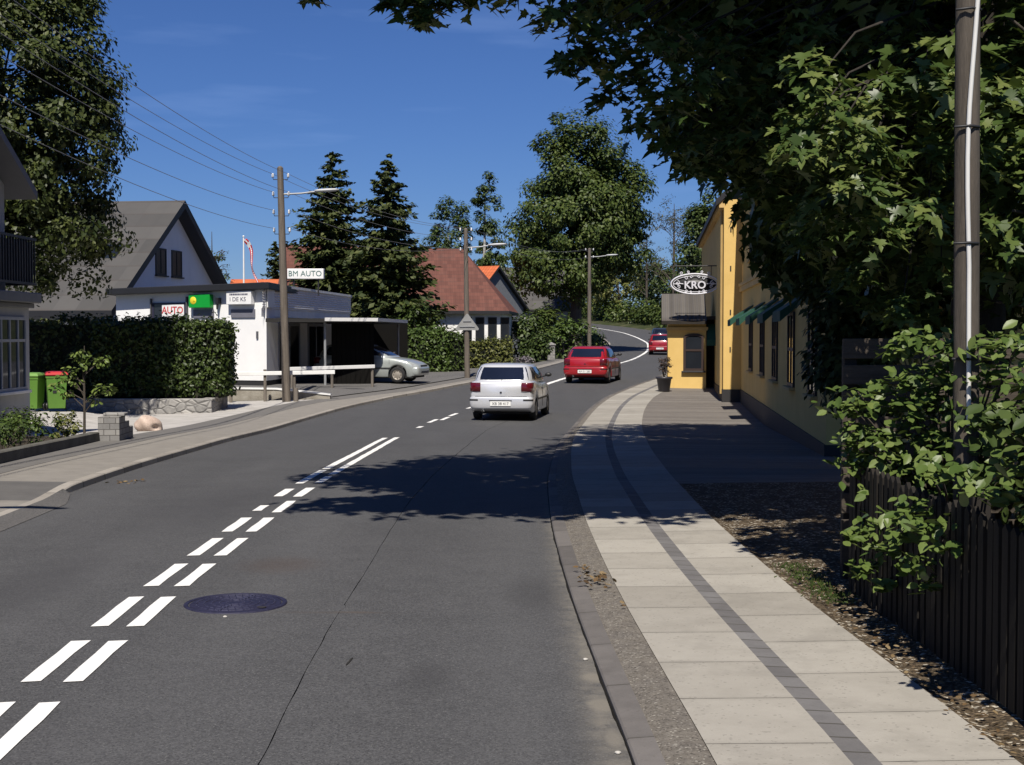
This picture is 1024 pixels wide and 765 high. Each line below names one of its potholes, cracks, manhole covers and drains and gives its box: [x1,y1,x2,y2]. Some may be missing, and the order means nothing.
manhole cover [183,593,287,614]
